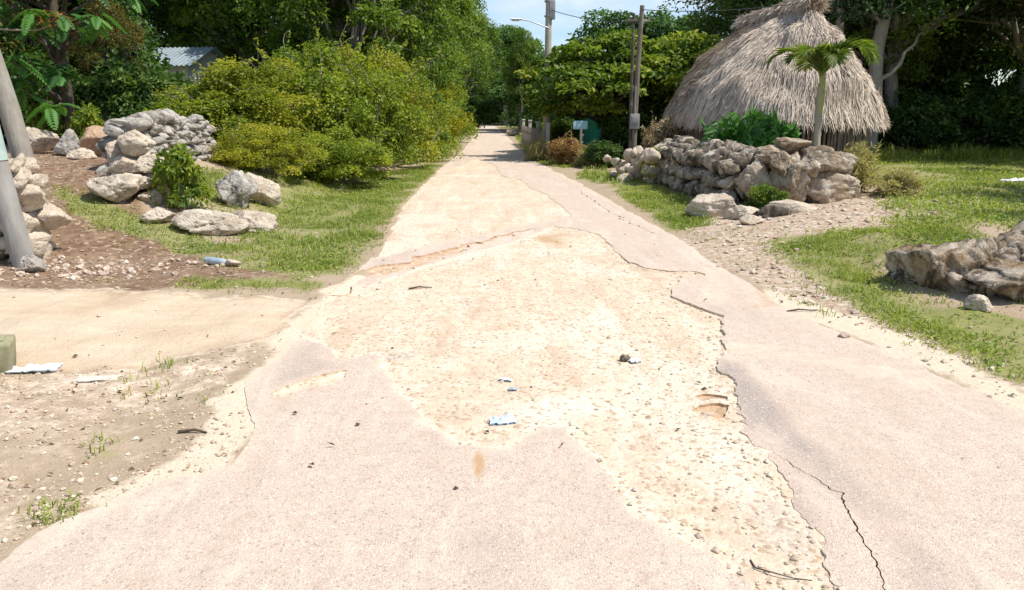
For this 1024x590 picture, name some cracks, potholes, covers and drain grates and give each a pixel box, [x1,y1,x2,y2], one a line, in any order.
crack [774,452,886,590]
pothole [301,226,838,590]
pothole [273,370,347,397]
